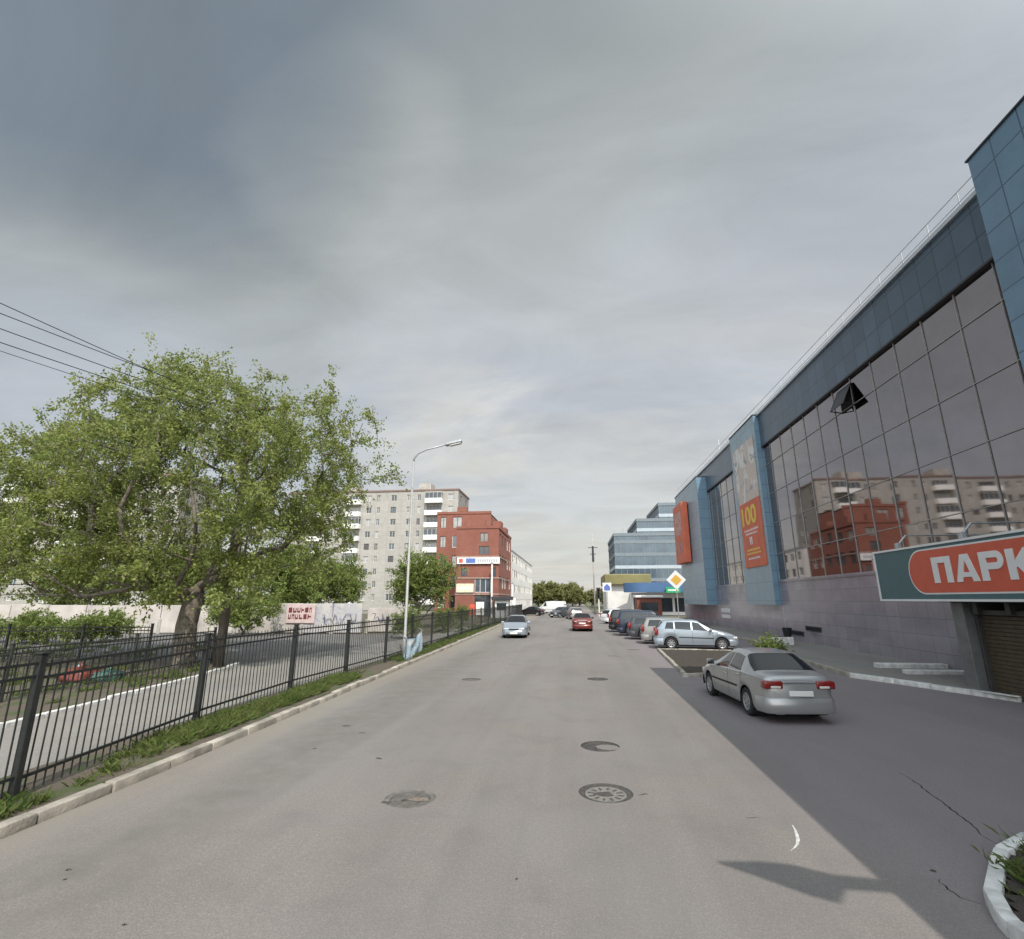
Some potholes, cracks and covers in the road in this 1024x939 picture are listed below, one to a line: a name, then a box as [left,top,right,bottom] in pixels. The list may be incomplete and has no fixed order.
crack [899,772,993,842]
manhole cover [581,741,620,752]
manhole cover [384,789,436,808]
manhole cover [579,783,633,803]
